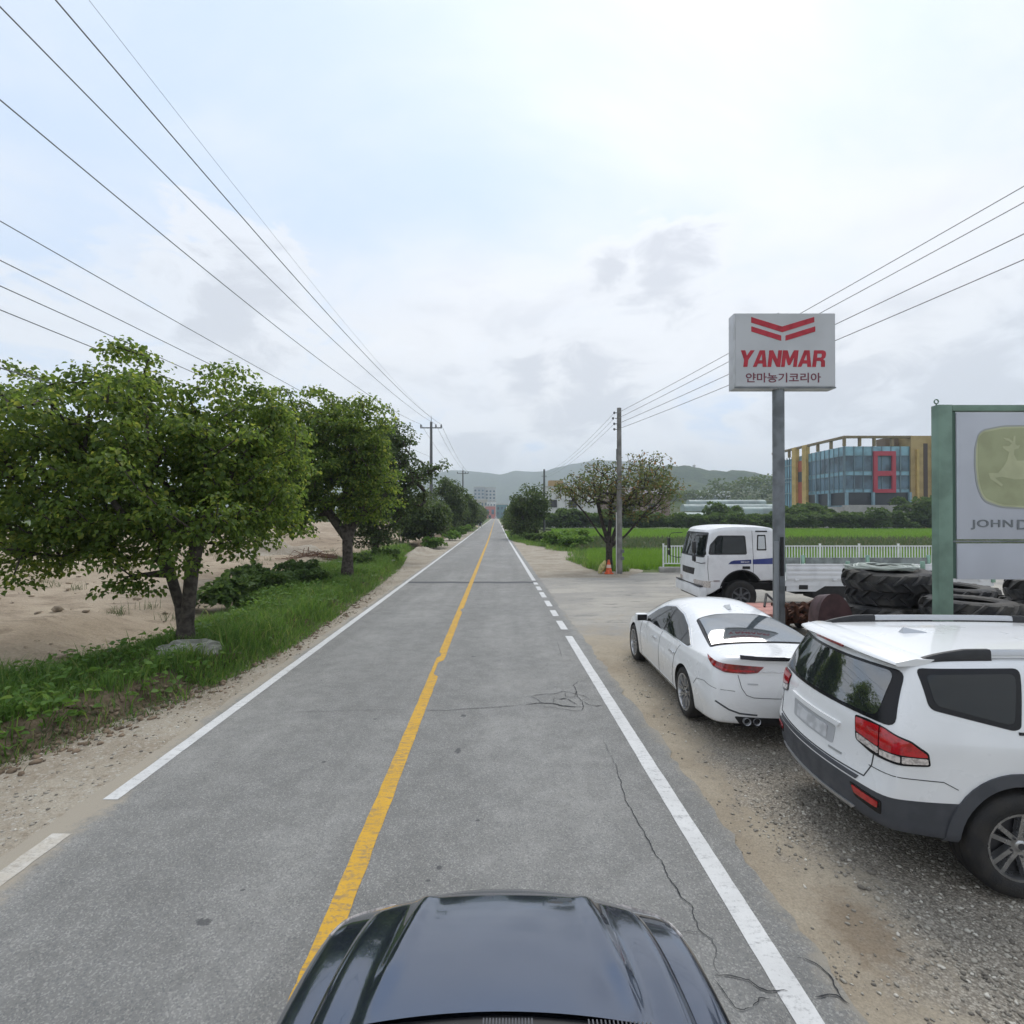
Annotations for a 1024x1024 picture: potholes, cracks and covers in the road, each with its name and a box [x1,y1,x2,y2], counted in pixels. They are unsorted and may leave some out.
crack [603,740,787,1010]
crack [266,681,599,715]
